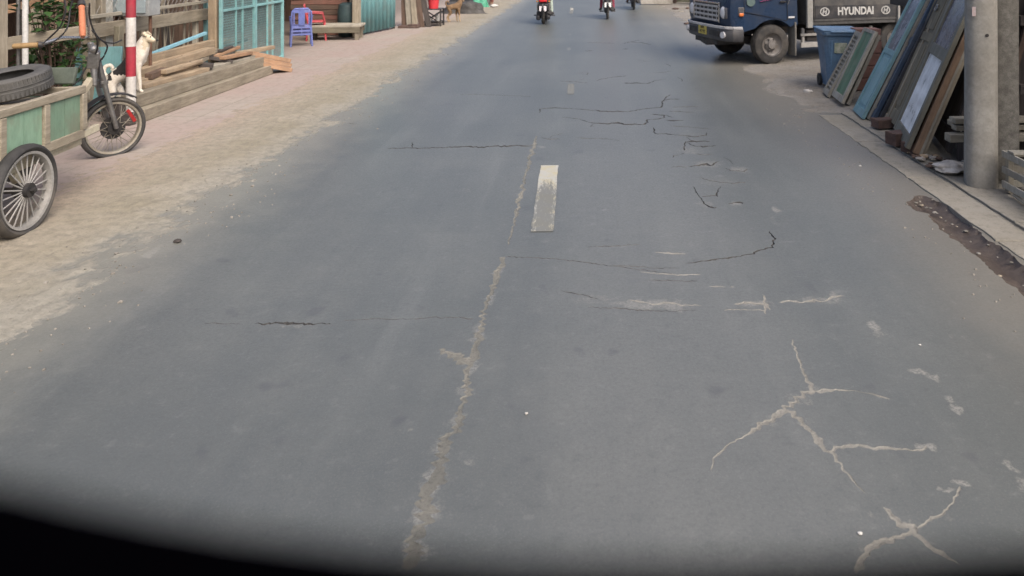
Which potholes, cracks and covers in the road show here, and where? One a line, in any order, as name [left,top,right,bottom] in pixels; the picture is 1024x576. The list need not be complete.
crack [255,64,842,553]
crack [710,340,962,559]
